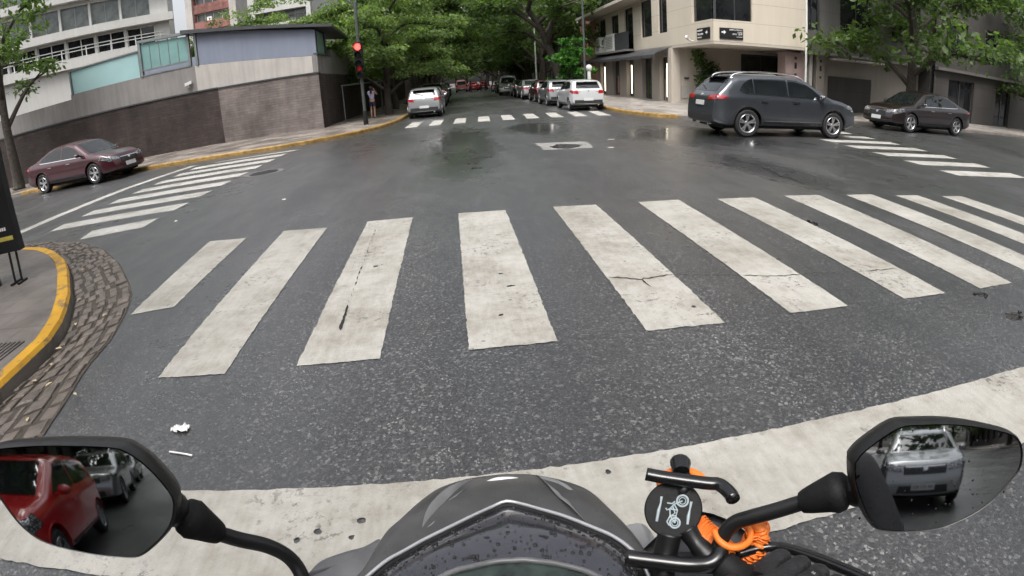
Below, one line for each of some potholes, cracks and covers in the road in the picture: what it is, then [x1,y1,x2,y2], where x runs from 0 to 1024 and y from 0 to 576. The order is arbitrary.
crack [339,244,370,330]
pothole [1005,310,1023,321]
crack [611,268,892,286]
